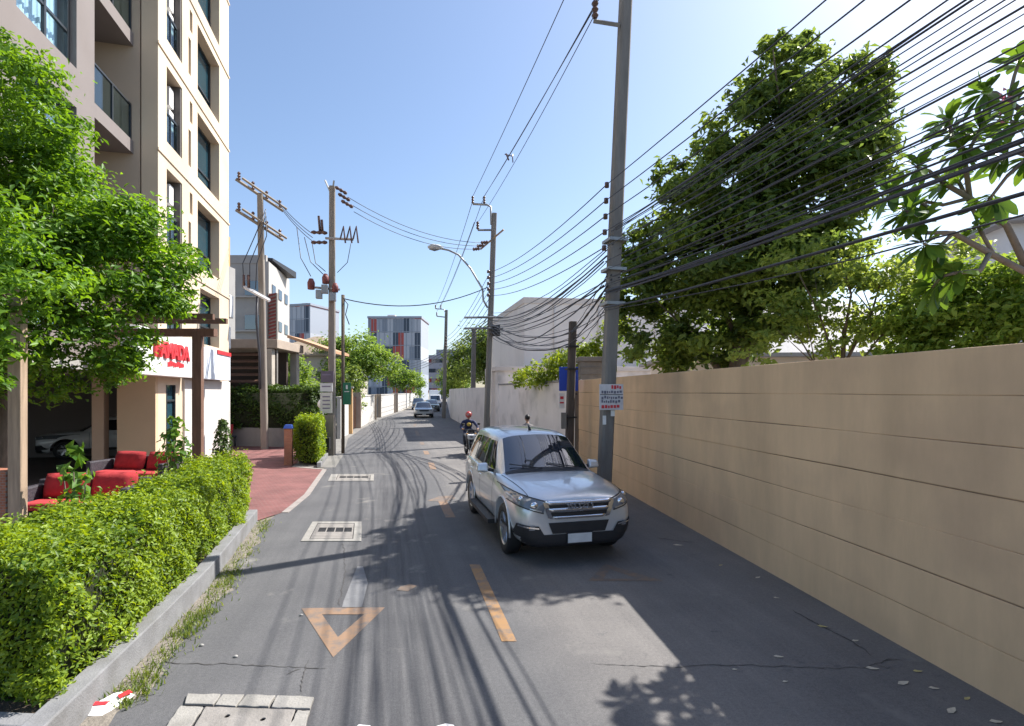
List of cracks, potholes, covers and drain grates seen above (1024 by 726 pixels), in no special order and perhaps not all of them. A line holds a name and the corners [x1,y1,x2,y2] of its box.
crack [595,610,899,669]
crack [166,660,317,692]
